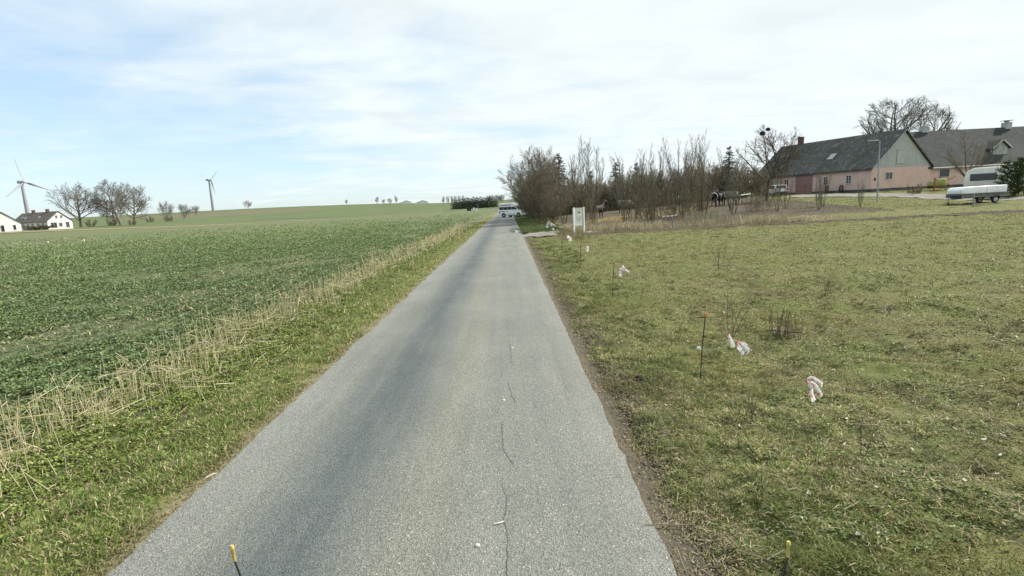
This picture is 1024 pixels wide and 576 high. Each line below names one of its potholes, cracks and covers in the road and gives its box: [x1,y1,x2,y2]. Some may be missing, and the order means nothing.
crack [501,421,514,574]
